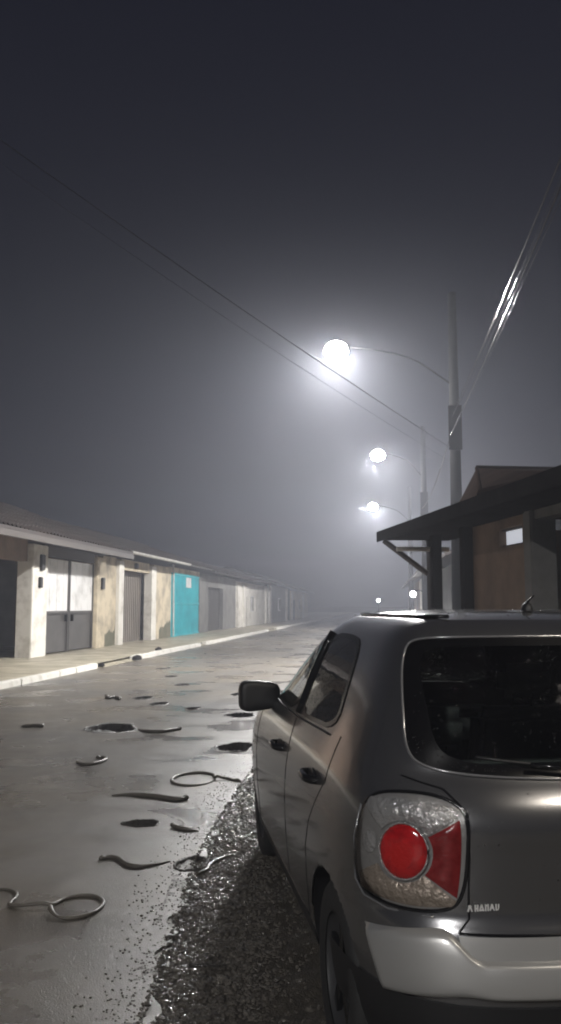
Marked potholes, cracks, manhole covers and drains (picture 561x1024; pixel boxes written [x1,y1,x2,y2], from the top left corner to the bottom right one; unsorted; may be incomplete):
pothole [81,723,137,733]
pothole [213,742,252,753]
pothole [120,819,160,827]
